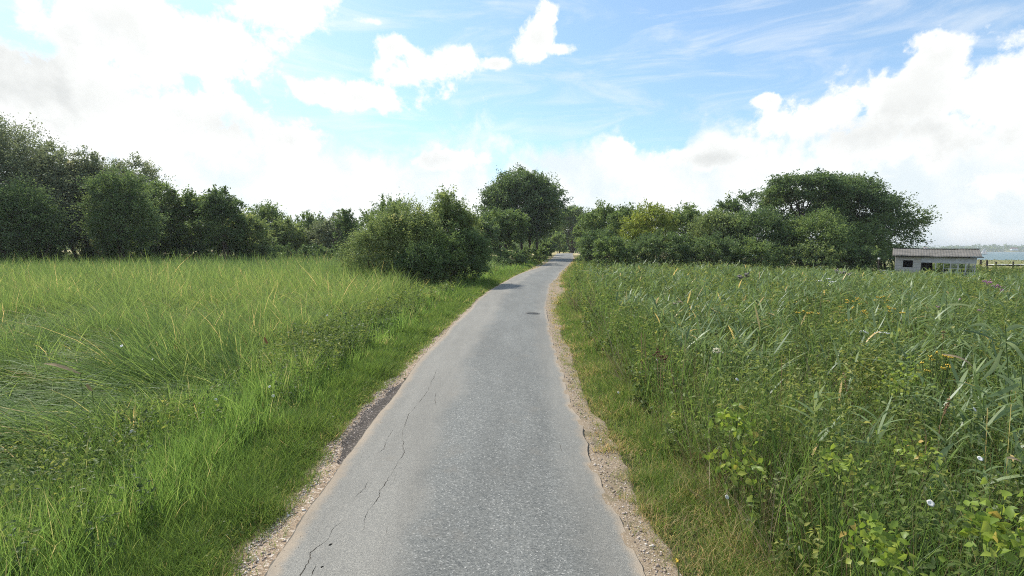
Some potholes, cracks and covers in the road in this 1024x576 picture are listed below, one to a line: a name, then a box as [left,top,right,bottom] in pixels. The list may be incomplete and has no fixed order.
crack [354,372,436,530]
